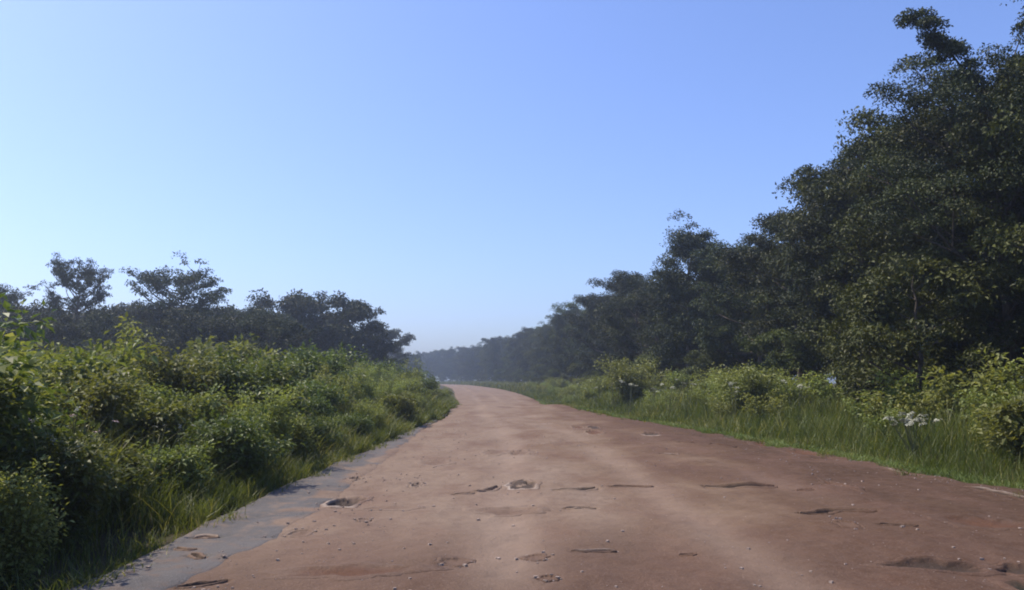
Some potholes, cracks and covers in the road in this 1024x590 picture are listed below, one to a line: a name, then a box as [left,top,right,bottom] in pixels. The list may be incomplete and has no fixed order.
pothole [536,574,560,583]
pothole [502,478,542,491]
pothole [320,495,374,509]
pothole [519,553,551,562]
pothole [433,557,476,567]
